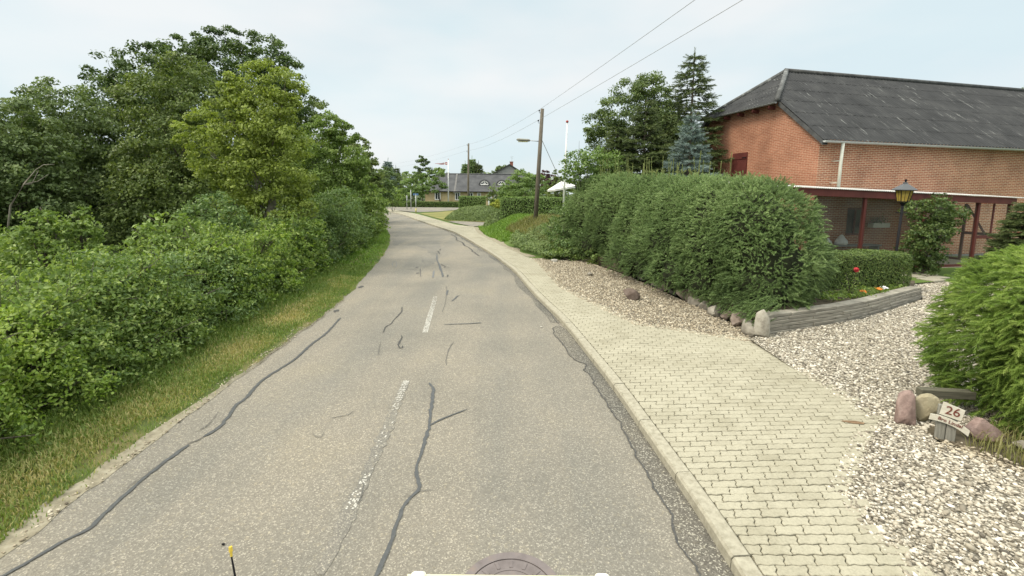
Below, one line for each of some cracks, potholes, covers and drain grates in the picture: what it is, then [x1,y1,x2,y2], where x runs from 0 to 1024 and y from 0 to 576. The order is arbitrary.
crack [420,234,479,311]
manhole cover [465,552,557,576]
crack [378,307,403,353]
